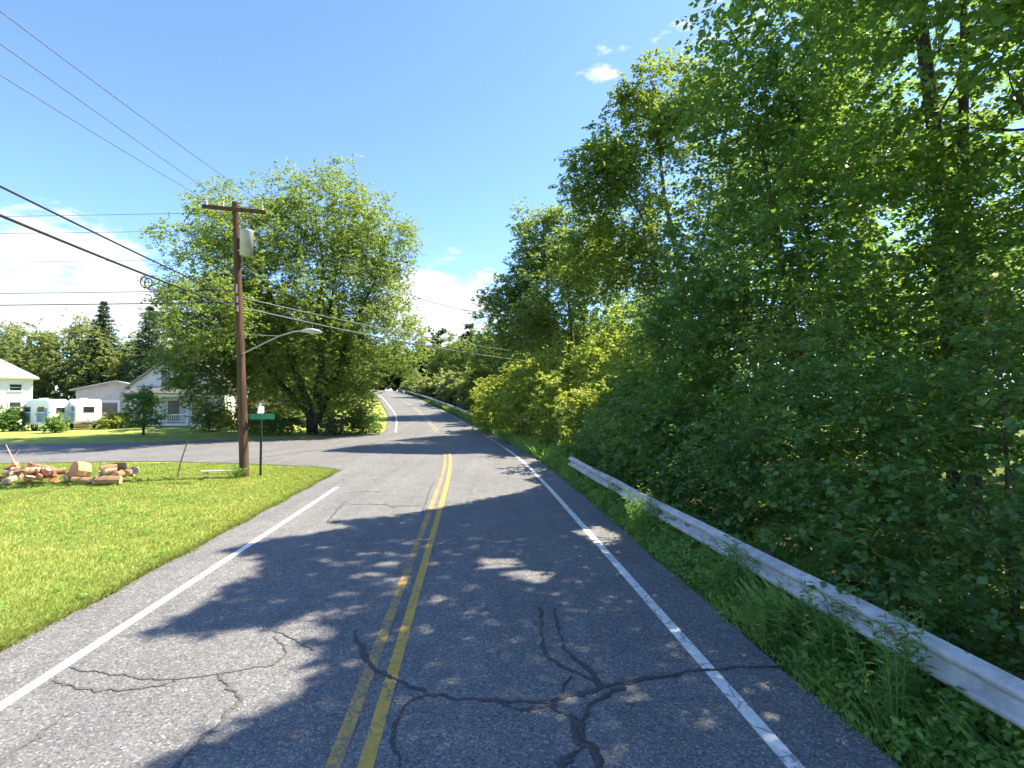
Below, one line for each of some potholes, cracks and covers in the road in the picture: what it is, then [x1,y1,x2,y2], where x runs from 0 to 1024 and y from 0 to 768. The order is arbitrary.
crack [52,620,313,768]
